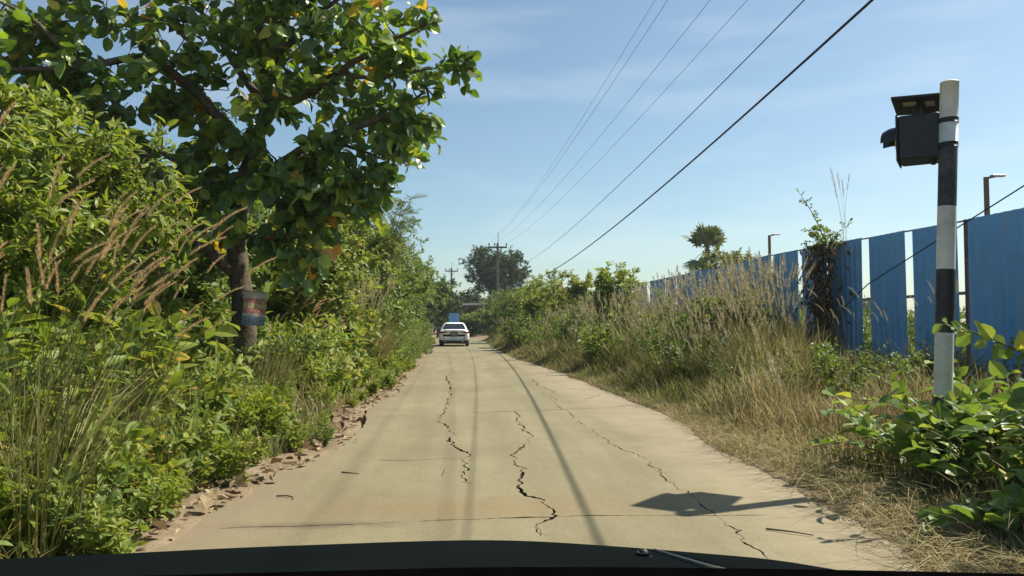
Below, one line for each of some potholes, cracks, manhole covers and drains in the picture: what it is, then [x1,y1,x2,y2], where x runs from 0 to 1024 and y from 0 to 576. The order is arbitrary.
crack [221,379,768,559]
